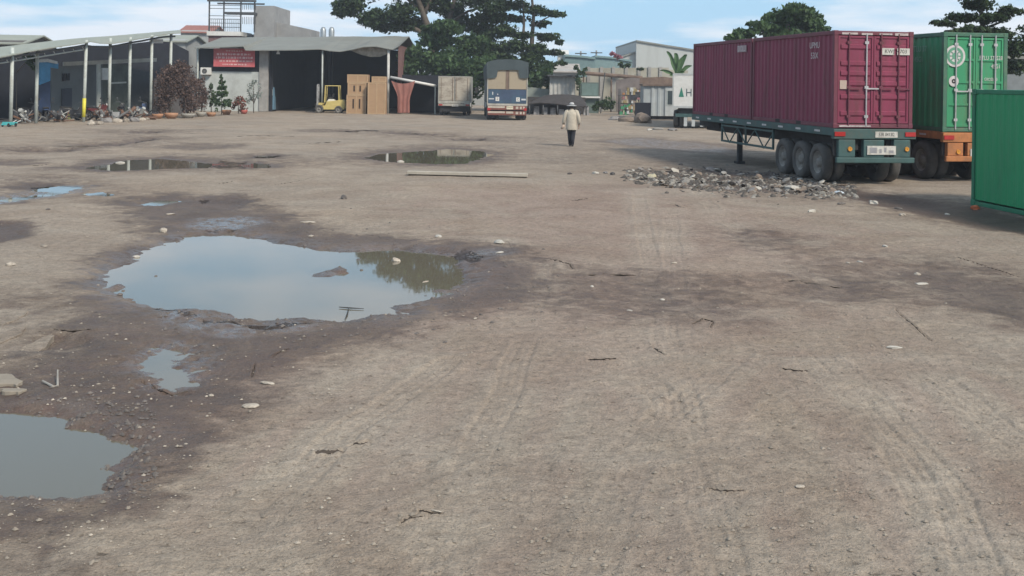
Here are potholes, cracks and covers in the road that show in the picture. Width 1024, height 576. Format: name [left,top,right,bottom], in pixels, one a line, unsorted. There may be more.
pothole [119,337,223,397]
crack [315,442,367,454]
pothole [64,228,503,330]
pothole [0,184,106,205]
pothole [336,146,516,166]
crack [401,510,441,523]
pothole [46,155,242,173]
pothole [0,396,188,508]
pothole [81,189,123,197]
pothole [212,158,253,170]
